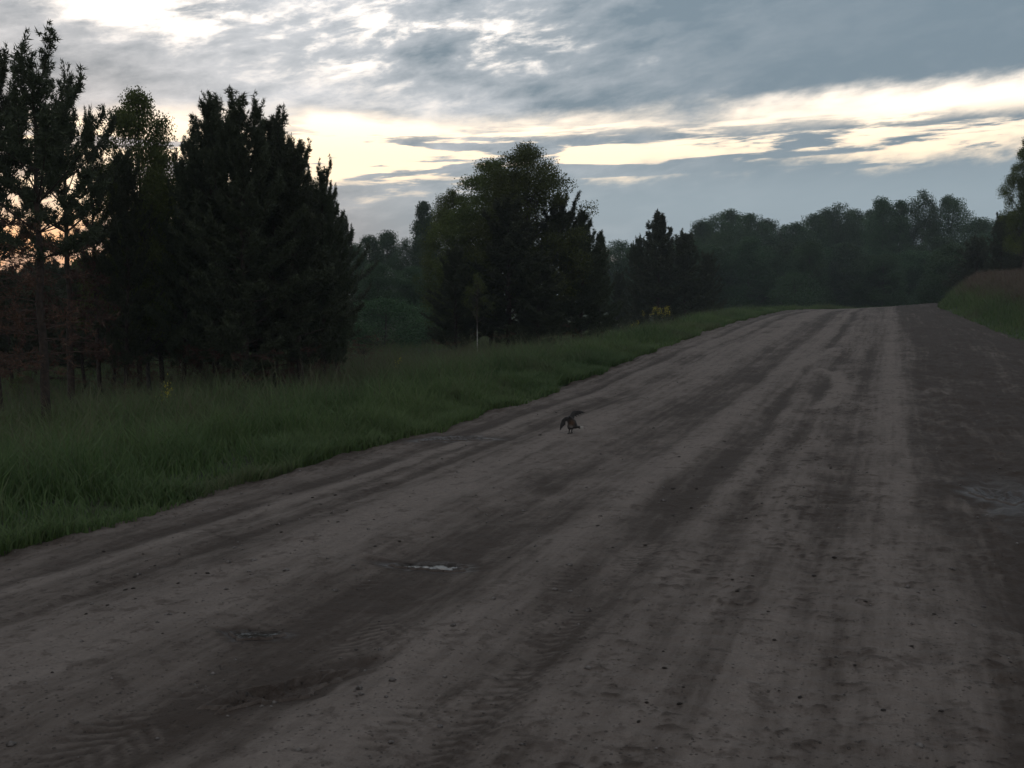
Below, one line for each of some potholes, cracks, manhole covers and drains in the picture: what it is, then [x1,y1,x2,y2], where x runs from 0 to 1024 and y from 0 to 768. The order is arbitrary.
pothole [388,561,469,572]
pothole [228,629,287,641]
pothole [968,488,1024,506]
